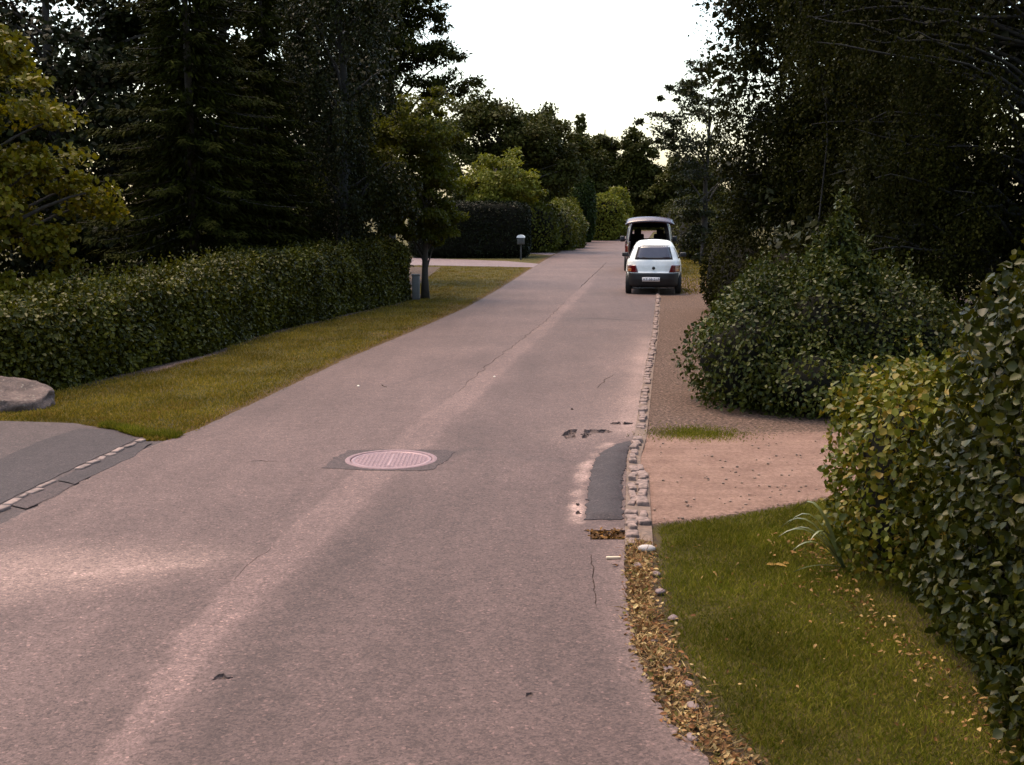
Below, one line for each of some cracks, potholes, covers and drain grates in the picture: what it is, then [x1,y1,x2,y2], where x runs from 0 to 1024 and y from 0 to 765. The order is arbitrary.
manhole cover [345,450,437,469]
pothole [580,429,612,438]
pothole [562,429,578,439]
crack [448,307,559,398]
